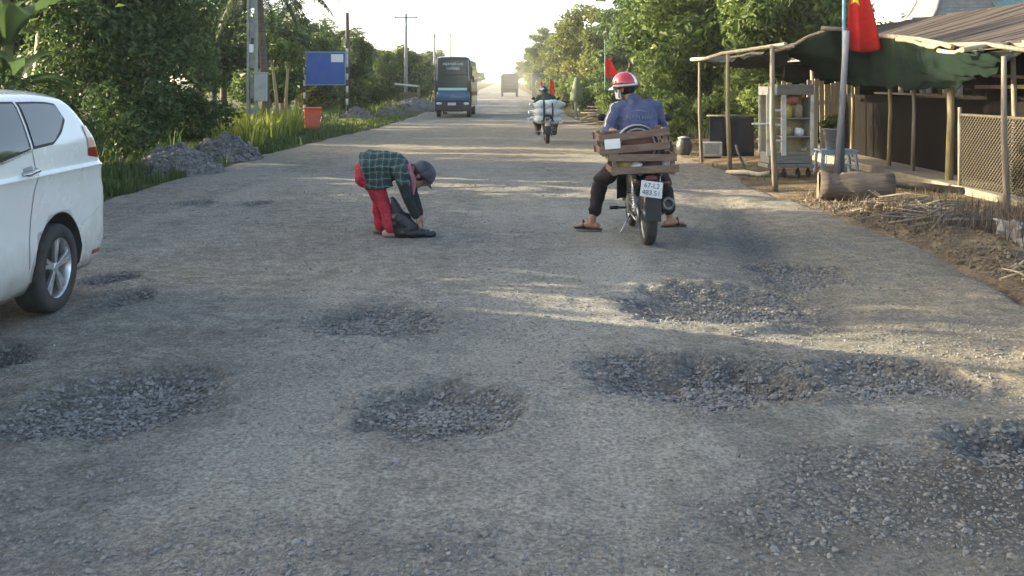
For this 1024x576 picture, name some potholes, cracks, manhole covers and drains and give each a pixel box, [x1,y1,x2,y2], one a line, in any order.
pothole [0,344,47,369]
pothole [0,365,240,445]
pothole [573,348,830,415]
pothole [349,380,530,442]
pothole [298,302,454,338]
pothole [931,420,1024,467]
pothole [178,198,217,206]
pothole [91,286,153,309]
pothole [75,272,149,286]
pothole [610,281,822,327]
pothole [803,355,990,403]
